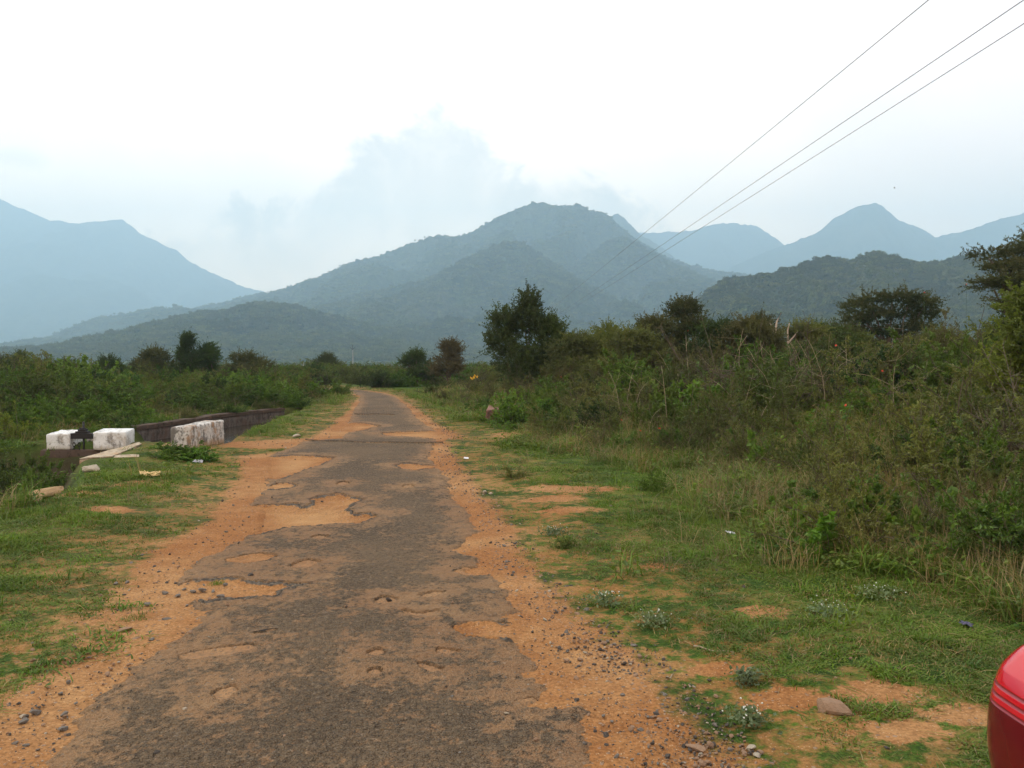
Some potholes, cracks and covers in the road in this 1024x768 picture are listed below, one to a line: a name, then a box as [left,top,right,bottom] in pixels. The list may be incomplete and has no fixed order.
pothole [213,687,238,700]
pothole [381,430,438,440]
pothole [176,577,308,603]
pothole [453,620,517,642]
pothole [218,493,376,538]
pothole [292,560,317,568]
pothole [252,455,333,480]
pothole [179,645,255,660]
pothole [226,553,276,564]
